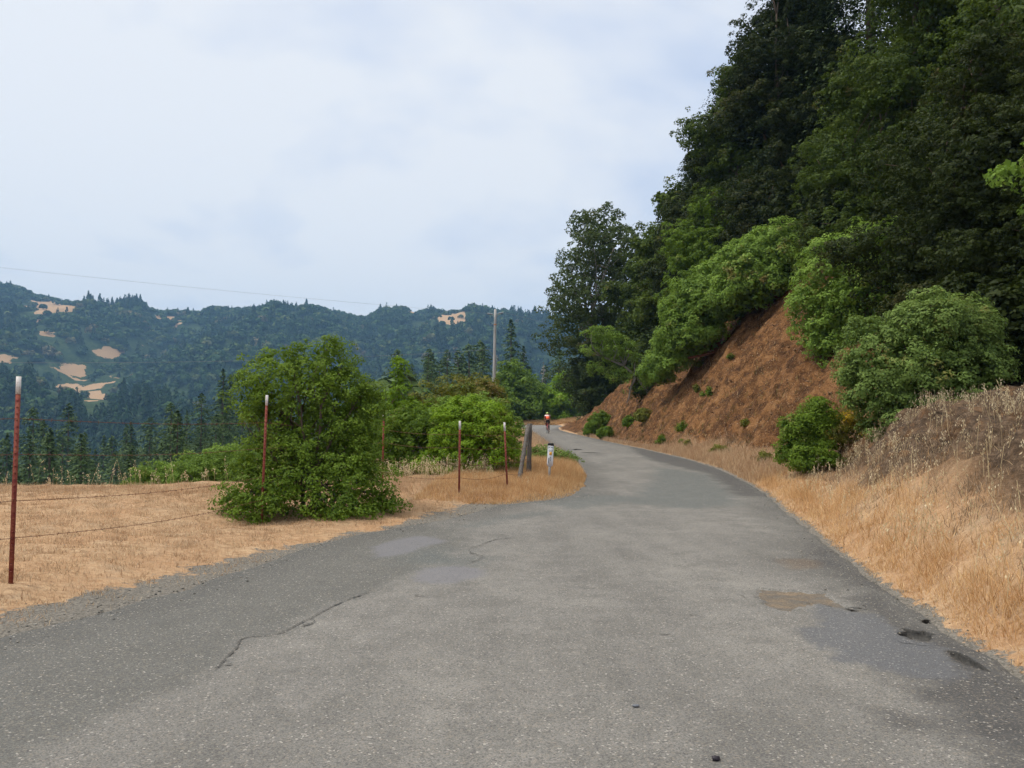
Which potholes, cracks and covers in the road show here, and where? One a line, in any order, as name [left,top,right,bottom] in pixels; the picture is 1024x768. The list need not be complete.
pothole [930,646,1009,678]
crack [211,590,371,671]
pothole [906,617,938,628]
pothole [882,626,949,646]
